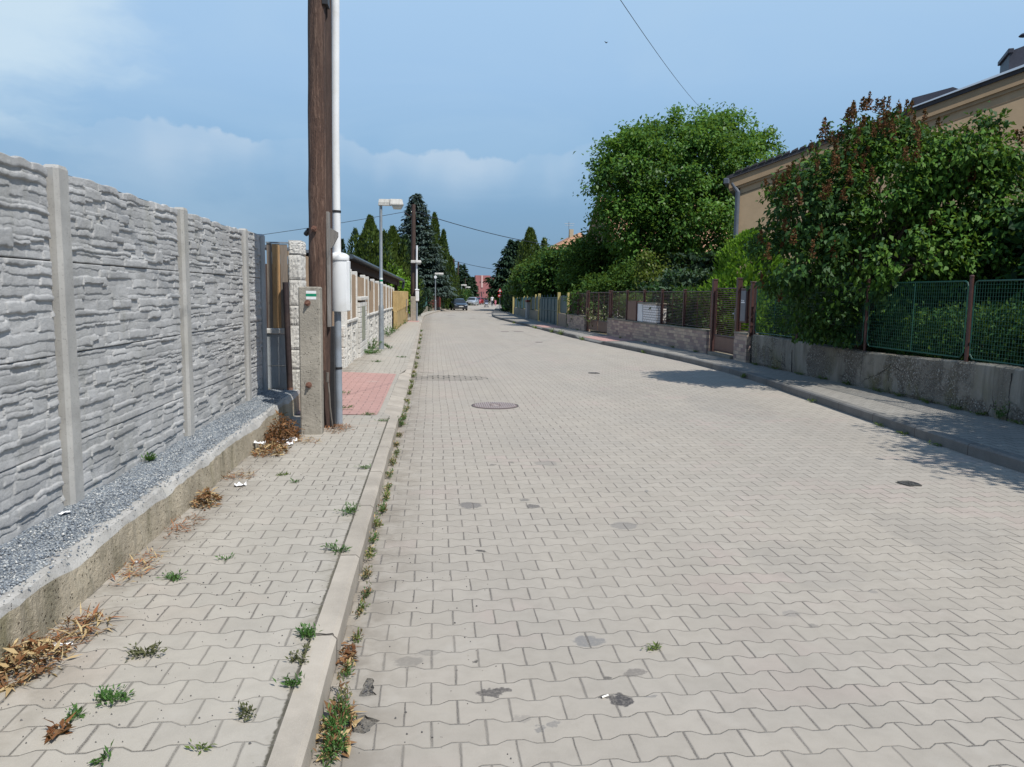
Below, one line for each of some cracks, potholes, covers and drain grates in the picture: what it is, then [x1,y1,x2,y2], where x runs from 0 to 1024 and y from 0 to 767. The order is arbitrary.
pothole [337,715,380,734]
pothole [359,678,376,697]
